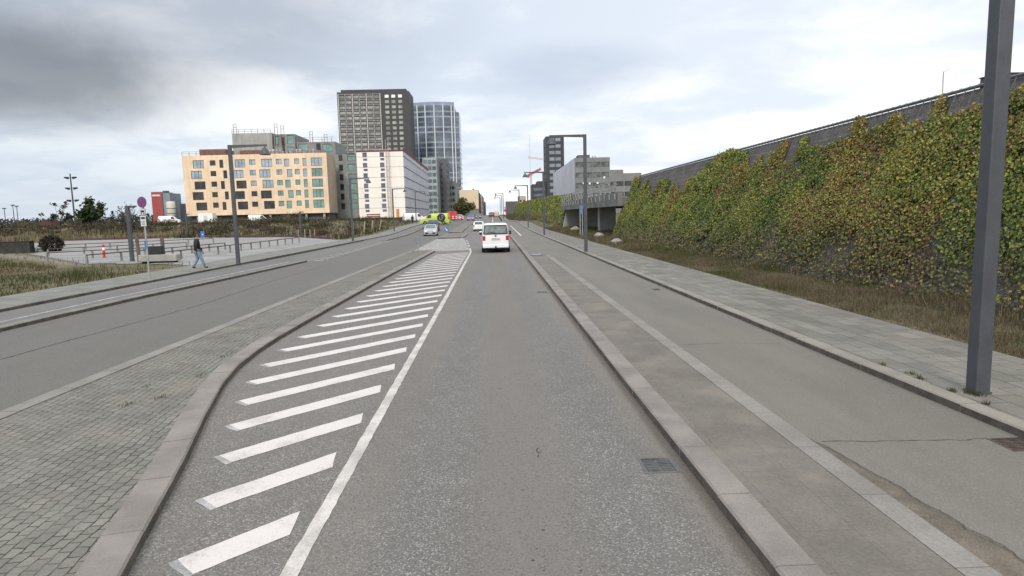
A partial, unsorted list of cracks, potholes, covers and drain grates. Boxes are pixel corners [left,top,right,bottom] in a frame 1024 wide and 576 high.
drain grate [637,457,680,474]
drain grate [986,437,1024,452]
